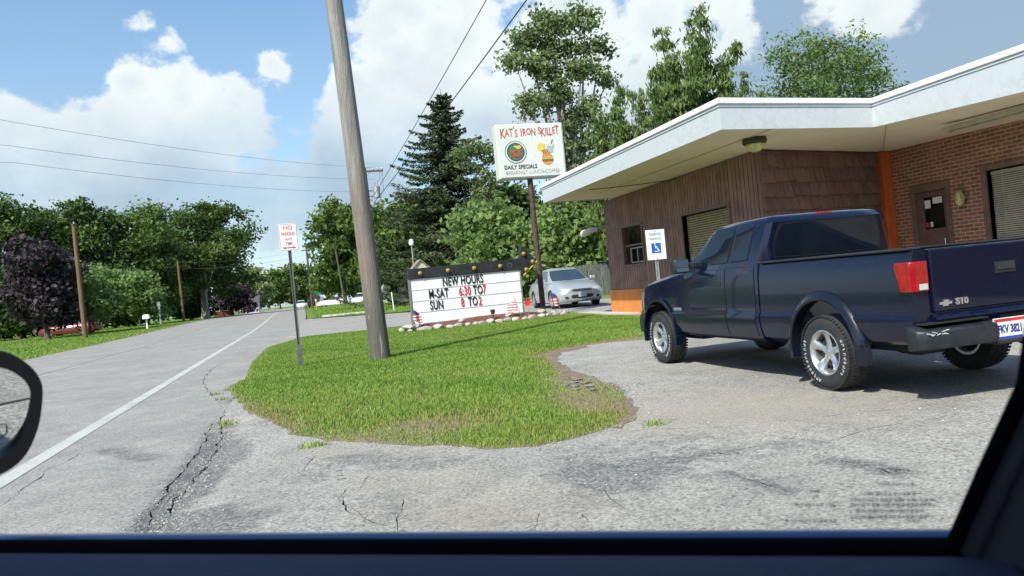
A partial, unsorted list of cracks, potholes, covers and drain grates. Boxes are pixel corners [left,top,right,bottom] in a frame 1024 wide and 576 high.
crack [341,476,404,530]
crack [823,404,998,442]
